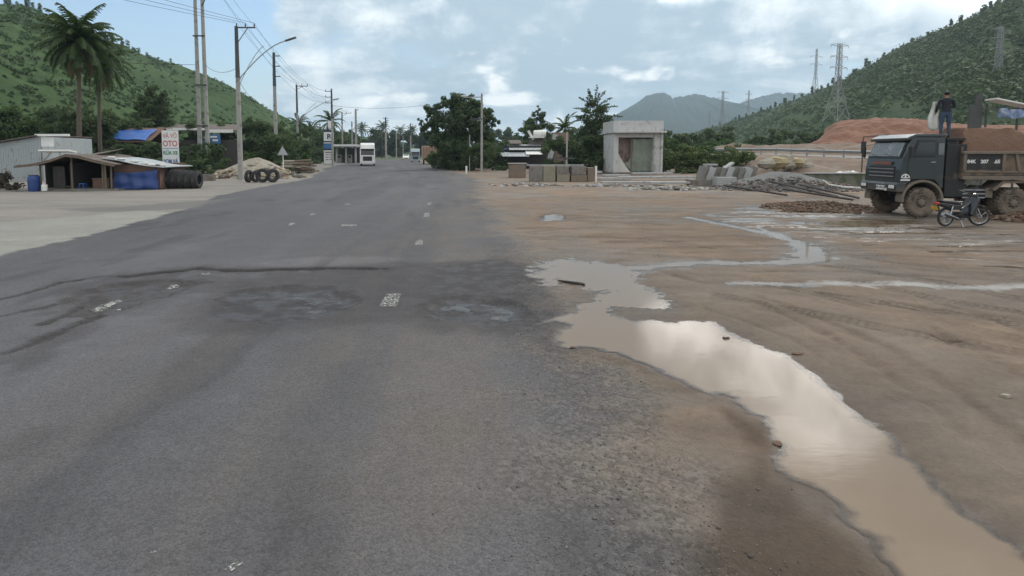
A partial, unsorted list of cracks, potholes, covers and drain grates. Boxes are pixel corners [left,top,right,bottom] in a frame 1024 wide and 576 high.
crack [103,267,391,278]
pothole [414,294,539,327]
